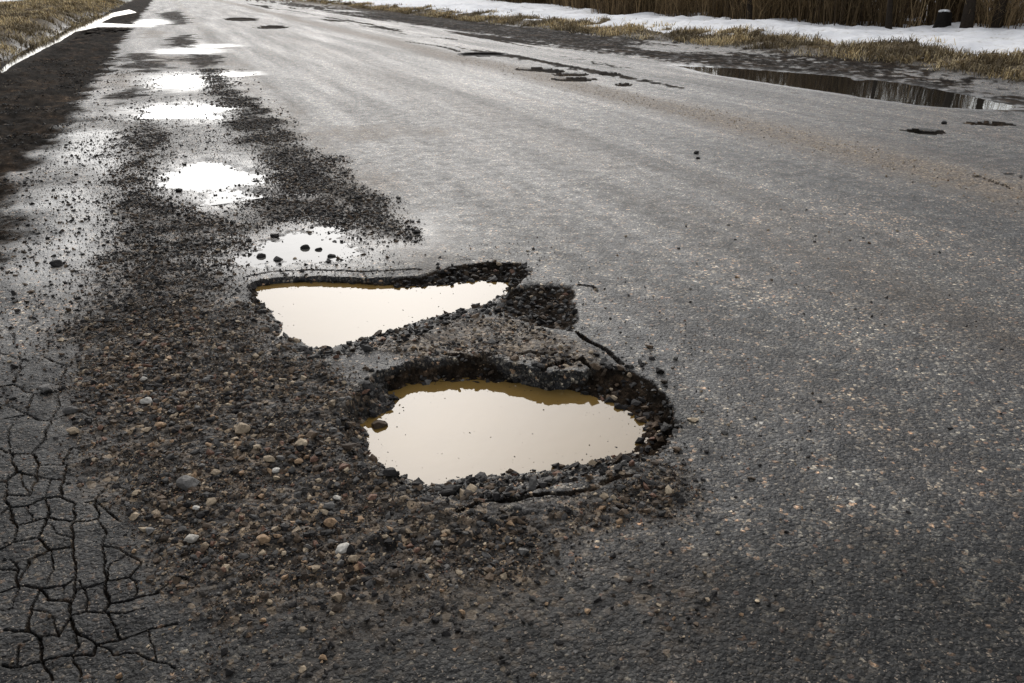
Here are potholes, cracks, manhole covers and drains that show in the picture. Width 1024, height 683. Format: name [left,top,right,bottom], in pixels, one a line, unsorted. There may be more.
crack [443,330,625,379]
pothole [150,159,279,208]
pothole [131,103,242,120]
pothole [144,73,211,90]
pothole [216,223,364,269]
